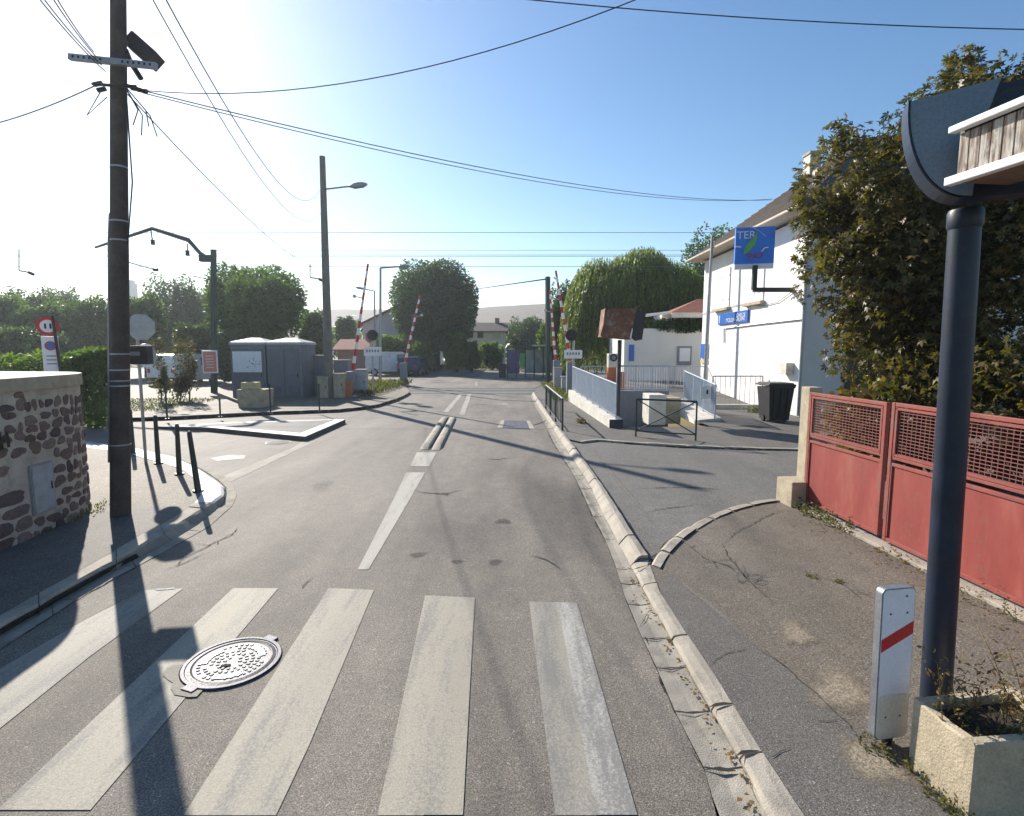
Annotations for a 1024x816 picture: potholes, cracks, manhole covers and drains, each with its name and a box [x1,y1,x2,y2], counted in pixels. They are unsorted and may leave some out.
crack [635,511,781,603]
manhole cover [163,635,283,697]
crack [167,530,236,569]
